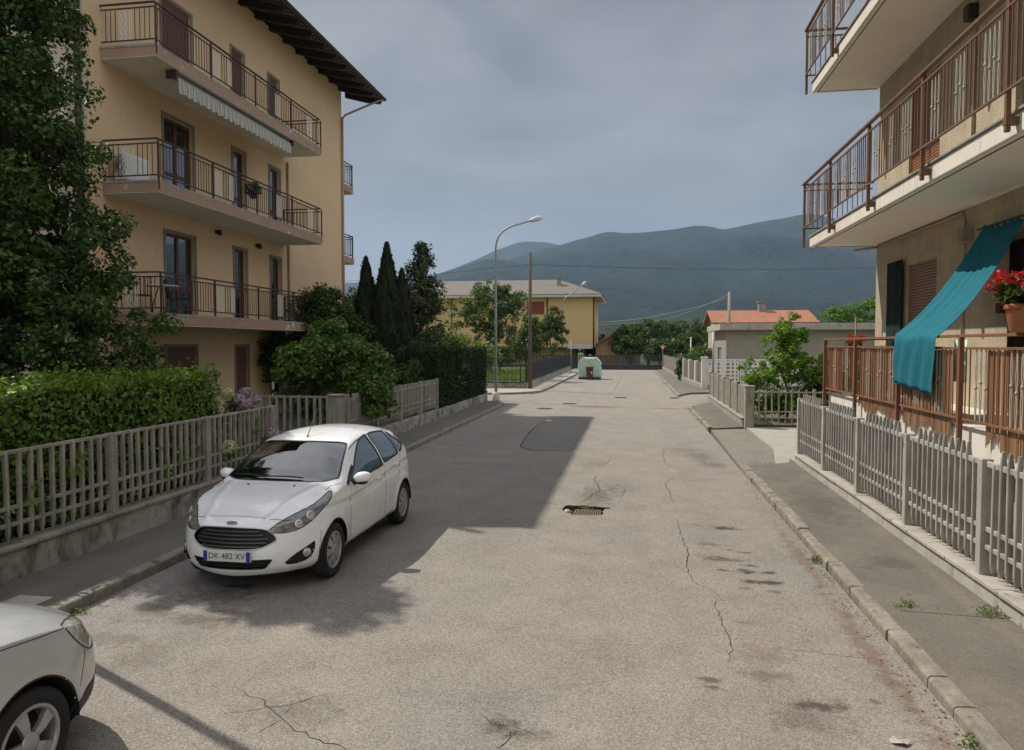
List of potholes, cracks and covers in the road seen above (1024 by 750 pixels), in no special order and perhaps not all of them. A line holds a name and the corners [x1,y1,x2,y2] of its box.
crack [225,688,347,750]
crack [677,523,734,662]
crack [482,714,536,750]
